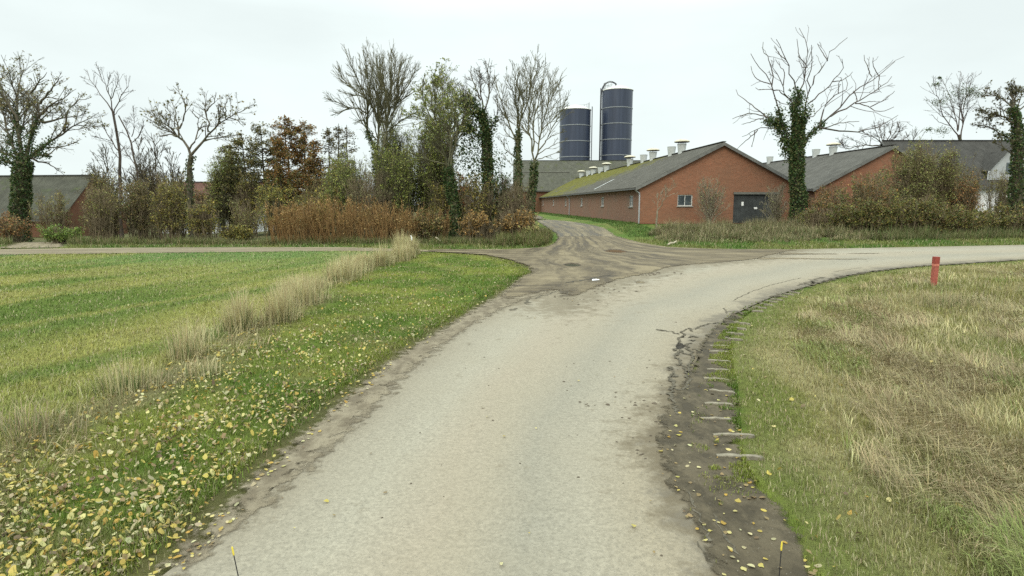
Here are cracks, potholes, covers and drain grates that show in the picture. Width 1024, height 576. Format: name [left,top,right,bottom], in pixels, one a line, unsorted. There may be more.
crack [656,267,862,415]
